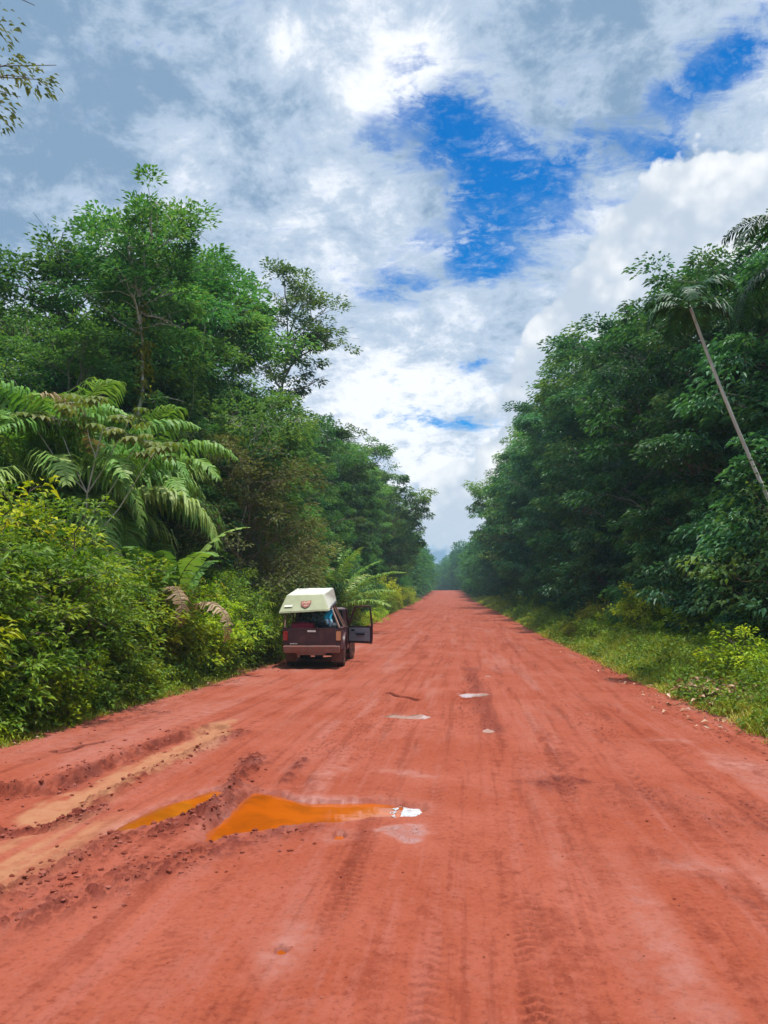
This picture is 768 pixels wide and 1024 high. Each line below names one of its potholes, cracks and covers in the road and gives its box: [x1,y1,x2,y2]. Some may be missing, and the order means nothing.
pothole [269,942,294,957]
pothole [378,712,435,720]
pothole [188,782,436,843]
